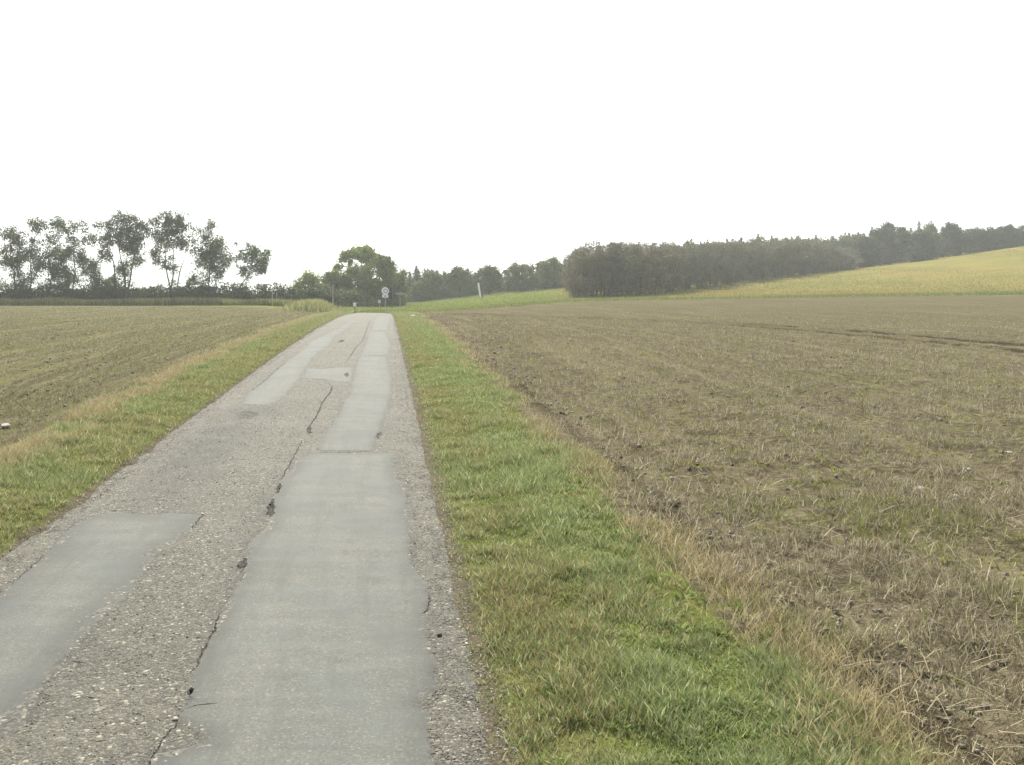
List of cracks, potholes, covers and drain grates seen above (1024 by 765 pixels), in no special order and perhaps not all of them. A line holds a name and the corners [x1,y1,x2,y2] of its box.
crack [279,385,370,482]
crack [191,609,223,672]
crack [148,703,215,765]
